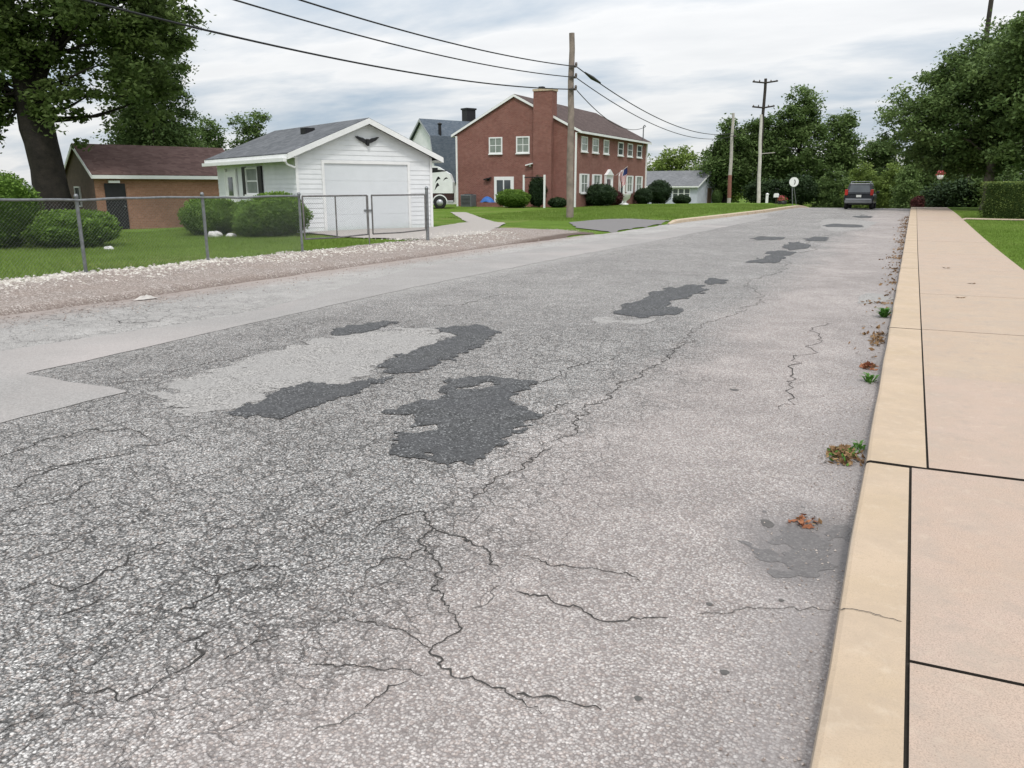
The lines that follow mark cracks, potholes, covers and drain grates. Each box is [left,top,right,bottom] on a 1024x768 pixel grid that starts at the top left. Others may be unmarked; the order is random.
crack [524,555,640,581]
crack [1,429,183,512]
crack [778,324,827,408]
crack [7,495,602,731]
crack [516,591,667,622]
crack [697,606,830,614]
crack [473,340,694,498]
